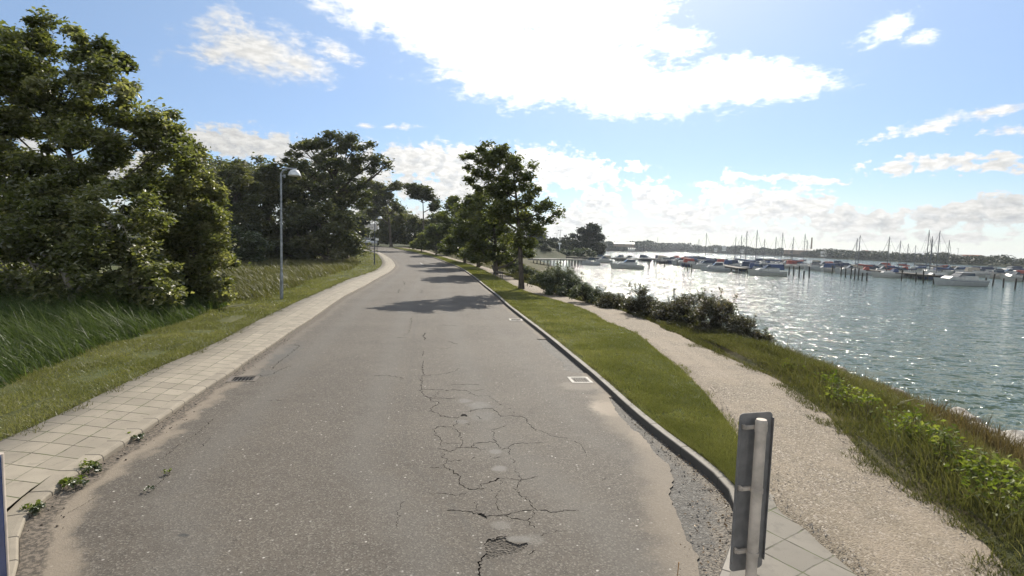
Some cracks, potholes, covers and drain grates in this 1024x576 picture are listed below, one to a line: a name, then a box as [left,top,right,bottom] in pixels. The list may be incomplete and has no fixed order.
pothole [485,537,528,559]
crack [421,361,586,576]
